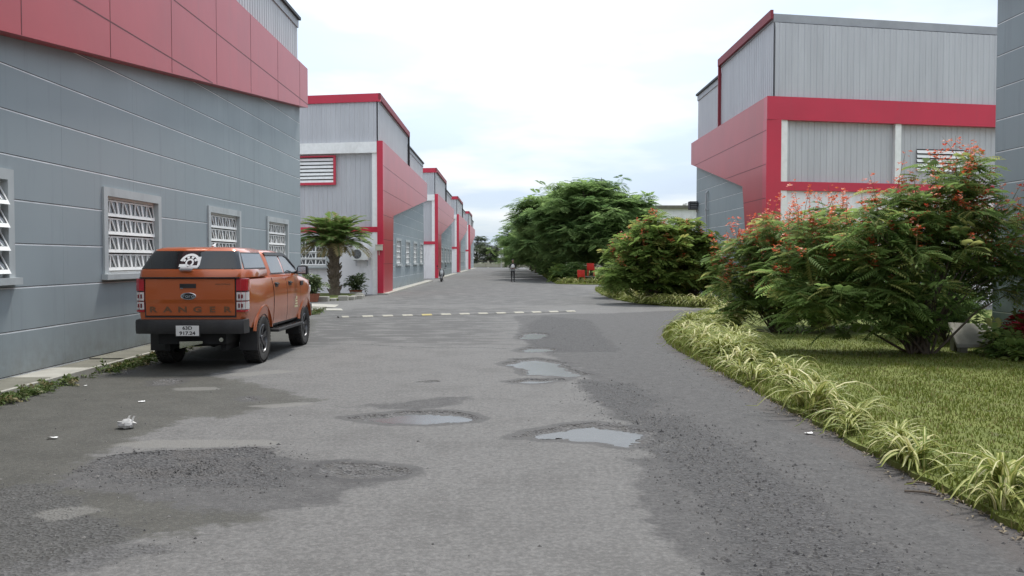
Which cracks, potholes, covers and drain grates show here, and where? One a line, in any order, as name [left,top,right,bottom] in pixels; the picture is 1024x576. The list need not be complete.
pothole [73,447,278,484]
pothole [501,358,595,377]
pothole [511,422,657,448]
pothole [312,461,413,479]
pothole [344,410,479,425]
